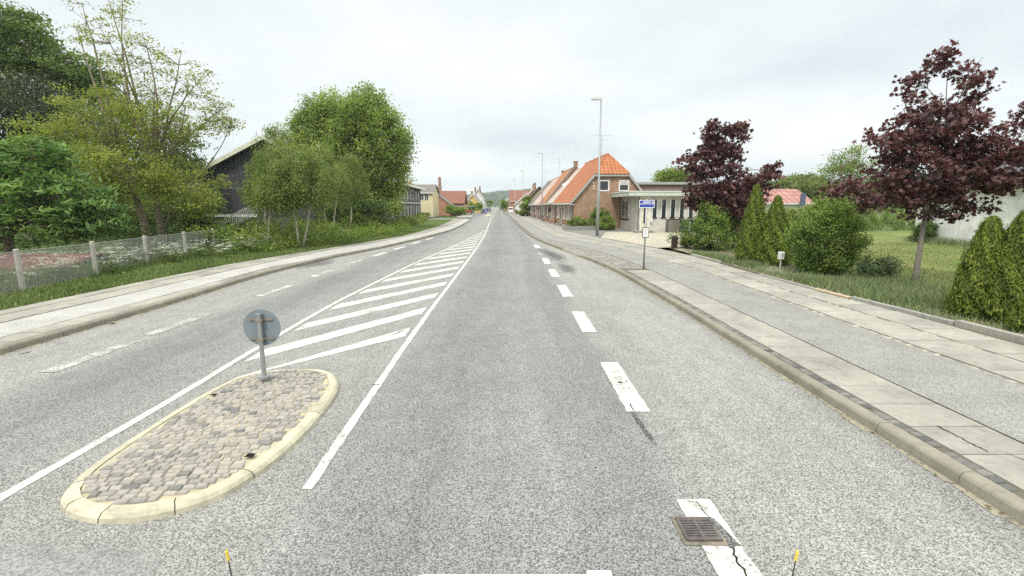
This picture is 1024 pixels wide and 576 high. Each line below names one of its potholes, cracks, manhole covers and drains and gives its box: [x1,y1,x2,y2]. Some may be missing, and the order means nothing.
drain grate [671,516,729,546]
crack [729,546,747,576]
